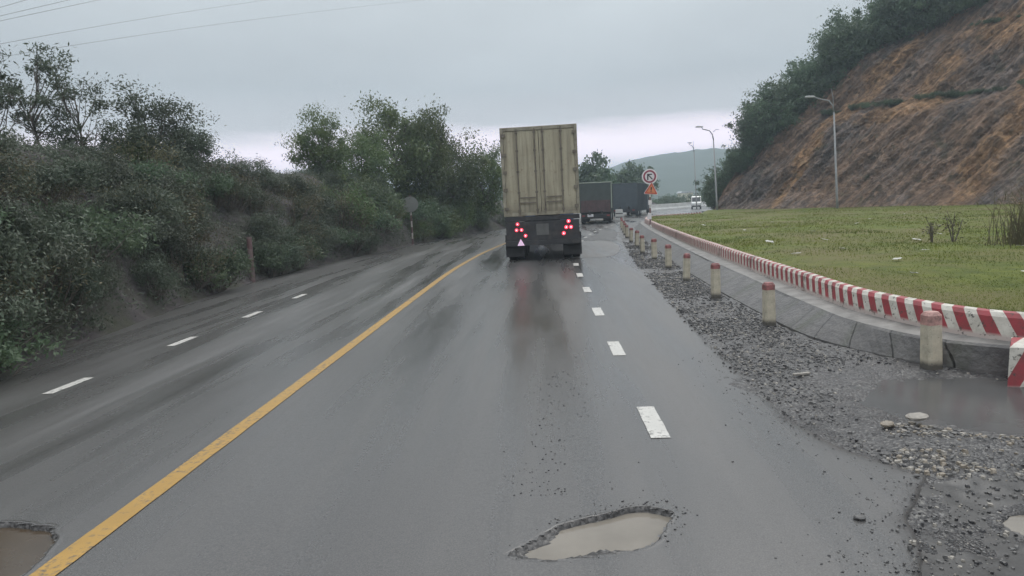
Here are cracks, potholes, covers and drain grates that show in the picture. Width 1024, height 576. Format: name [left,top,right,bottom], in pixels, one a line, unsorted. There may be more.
pothole [0,520,65,576]
pothole [984,504,1024,545]
pothole [501,505,679,563]
